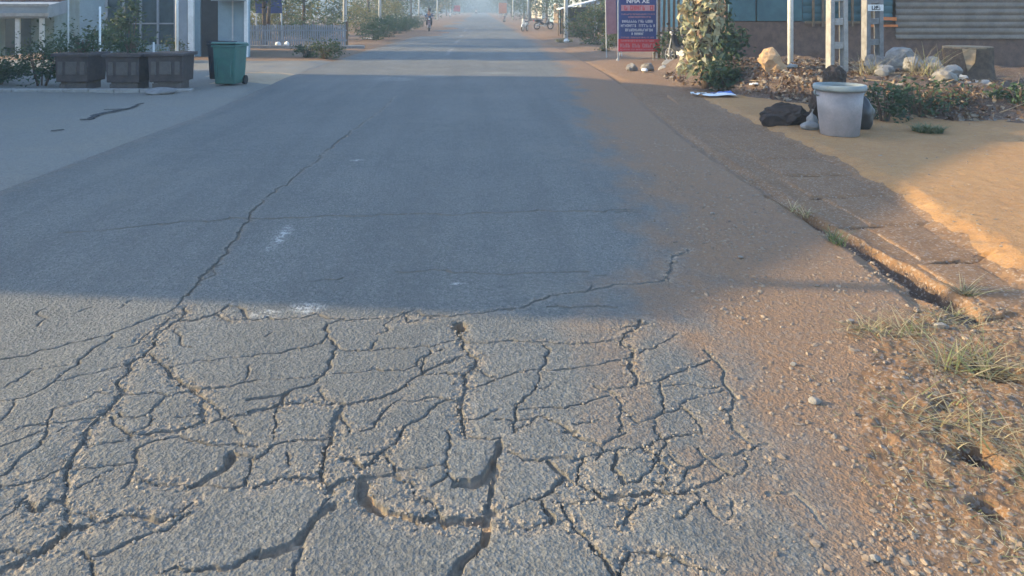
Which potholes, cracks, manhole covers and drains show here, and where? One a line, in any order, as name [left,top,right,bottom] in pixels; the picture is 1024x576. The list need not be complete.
pothole [450,321,468,335]
crack [58,99,643,296]
crack [394,249,690,311]
crack [0,296,829,576]
